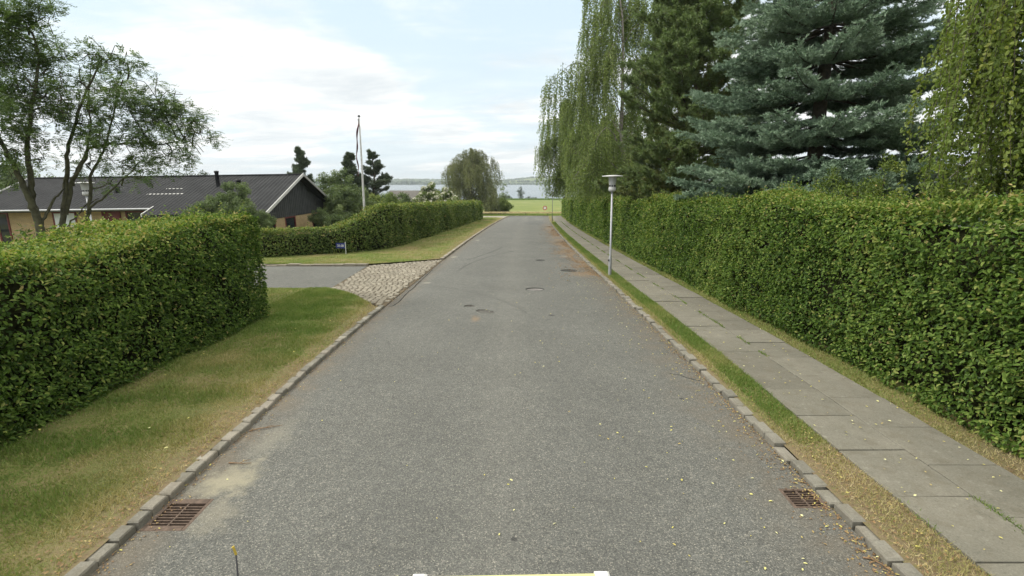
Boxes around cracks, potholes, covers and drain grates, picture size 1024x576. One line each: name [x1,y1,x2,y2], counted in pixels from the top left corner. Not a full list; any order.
drain grate [140,499,214,531]
drain grate [778,489,830,509]
